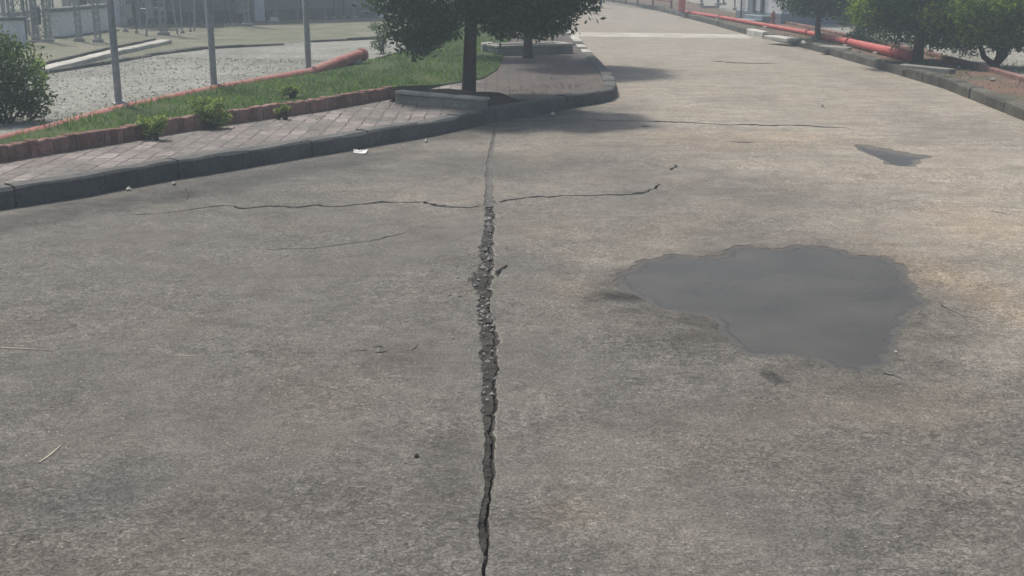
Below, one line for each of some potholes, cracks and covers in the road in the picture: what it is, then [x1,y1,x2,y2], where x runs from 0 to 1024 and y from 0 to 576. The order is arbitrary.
crack [598,120,844,143]
crack [134,129,678,576]
